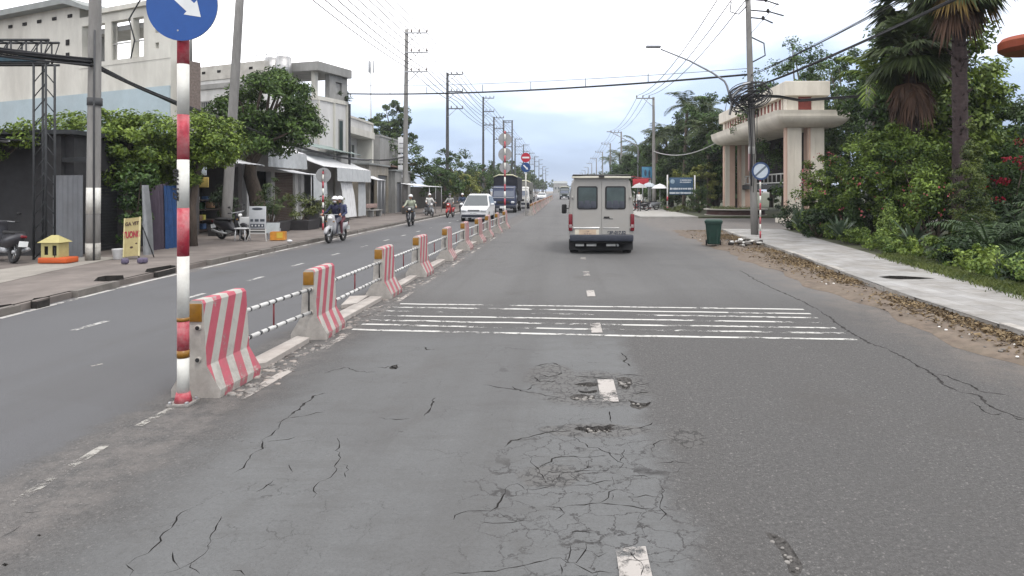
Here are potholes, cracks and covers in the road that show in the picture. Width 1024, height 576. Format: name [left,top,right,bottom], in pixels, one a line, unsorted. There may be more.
crack [127,509,222,575]
crack [454,411,686,575]
pothole [765,531,803,576]
pothole [574,424,615,433]
crack [490,353,647,399]
pothole [616,377,633,390]
crack [932,374,1022,420]
crack [313,438,349,498]
crack [239,393,323,491]
pothole [628,400,651,409]
